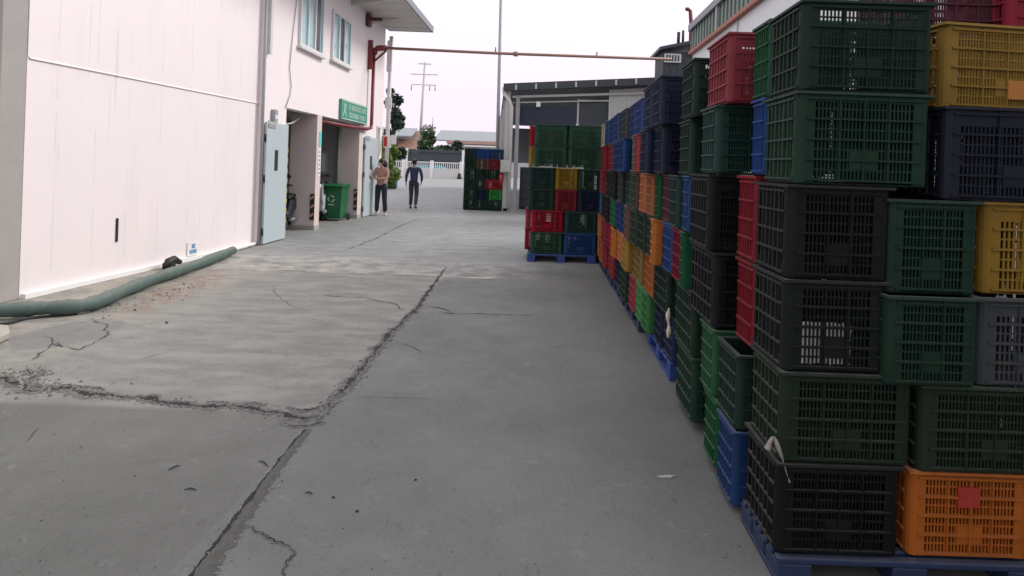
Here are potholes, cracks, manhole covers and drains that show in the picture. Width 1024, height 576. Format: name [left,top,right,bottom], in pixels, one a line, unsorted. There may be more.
crack [248,524,296,576]
crack [0,317,341,440]
